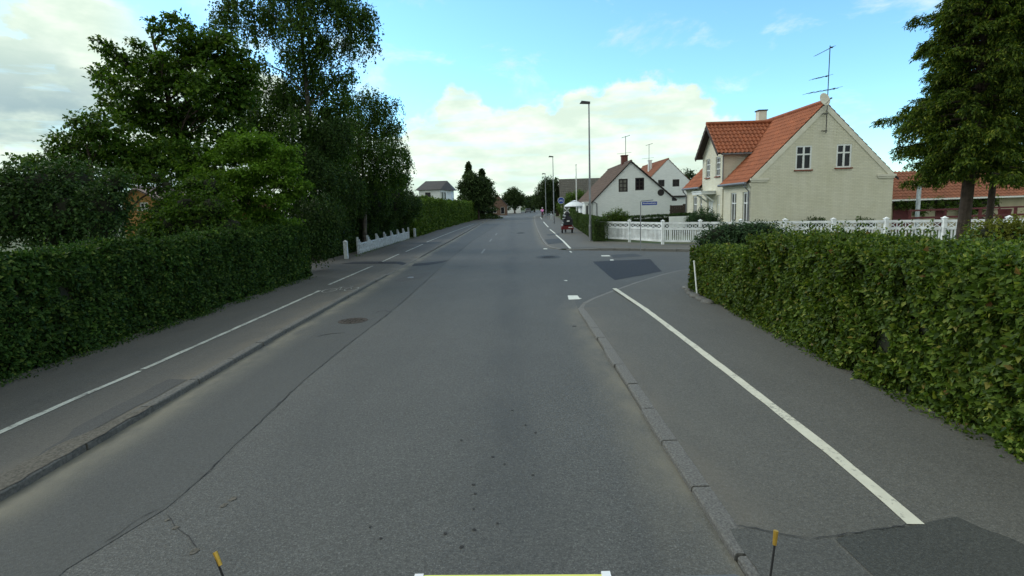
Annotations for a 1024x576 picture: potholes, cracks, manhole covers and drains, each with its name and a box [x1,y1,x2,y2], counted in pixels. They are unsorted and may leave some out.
crack [105,508,197,547]
